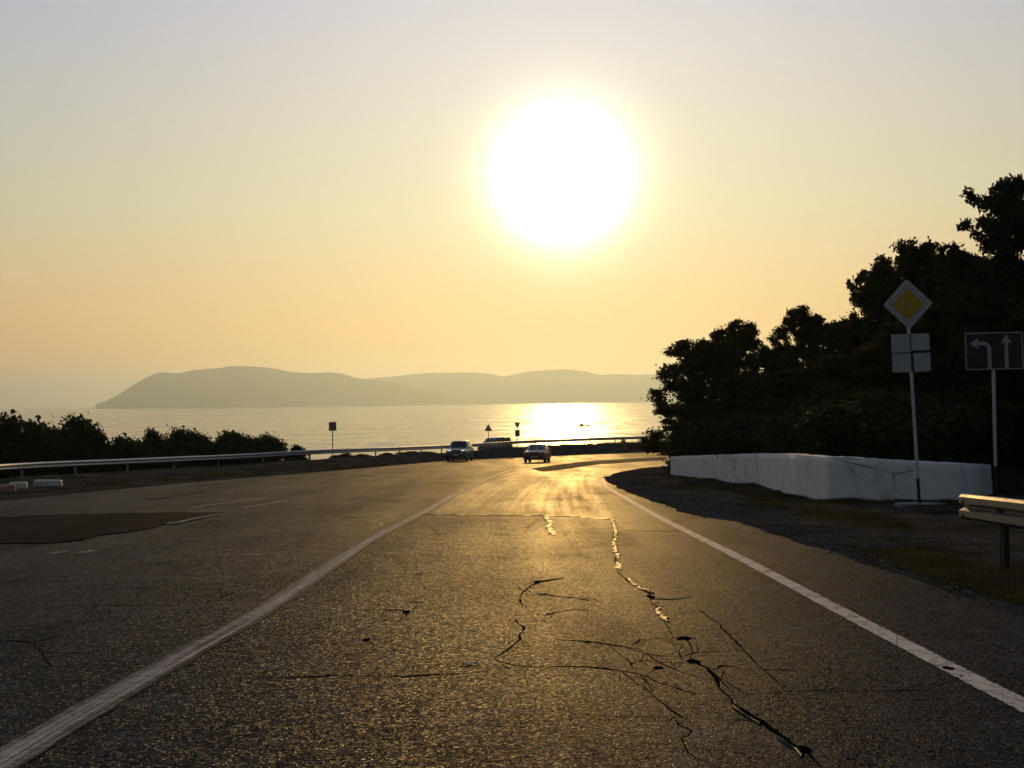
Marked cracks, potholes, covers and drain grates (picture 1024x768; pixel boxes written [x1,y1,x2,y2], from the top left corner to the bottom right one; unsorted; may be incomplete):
crack [244,577,962,768]
crack [9,634,100,667]
crack [543,516,556,536]
